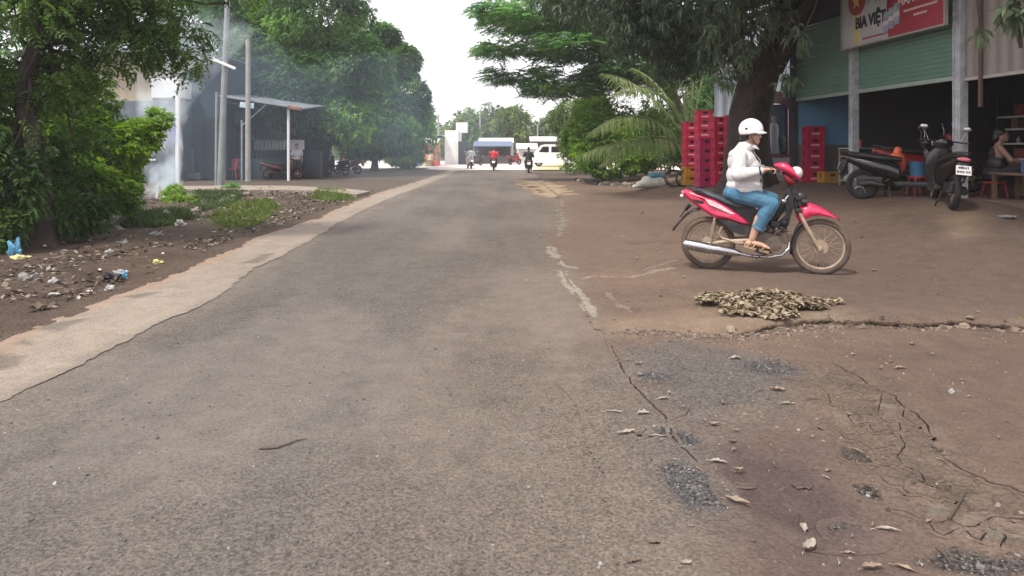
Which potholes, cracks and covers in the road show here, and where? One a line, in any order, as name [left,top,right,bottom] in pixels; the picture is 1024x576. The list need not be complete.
pothole [730,356,812,380]
crack [545,201,741,473]
pothole [650,456,745,520]
crack [813,362,1024,553]
pothole [703,436,893,556]
